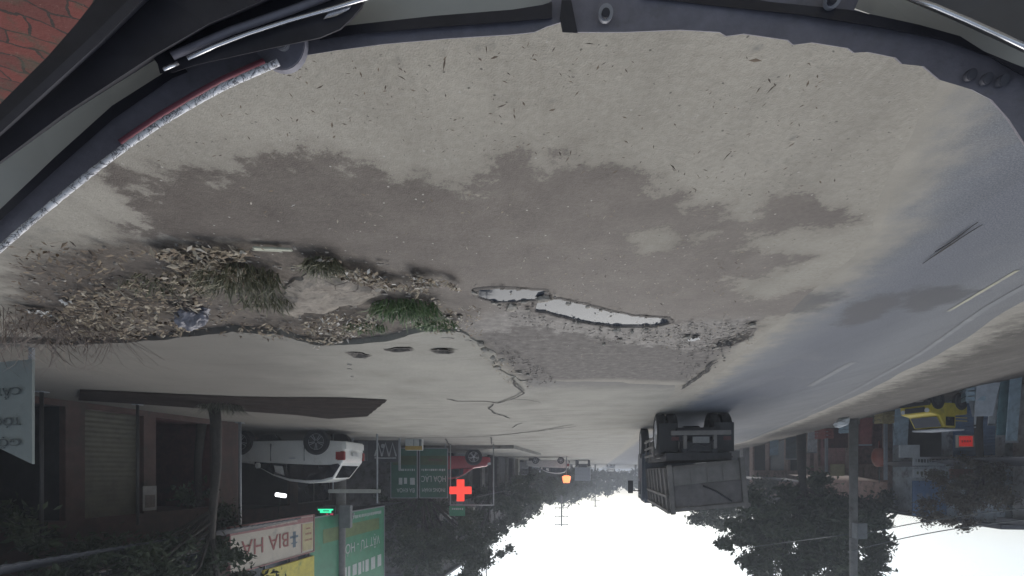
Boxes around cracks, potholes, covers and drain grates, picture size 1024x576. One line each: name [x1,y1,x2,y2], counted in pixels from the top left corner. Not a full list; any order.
crack [682,361,718,389]
pothole [472,286,550,307]
crack [394,379,576,445]
pothole [530,297,675,331]
crack [924,222,981,263]
